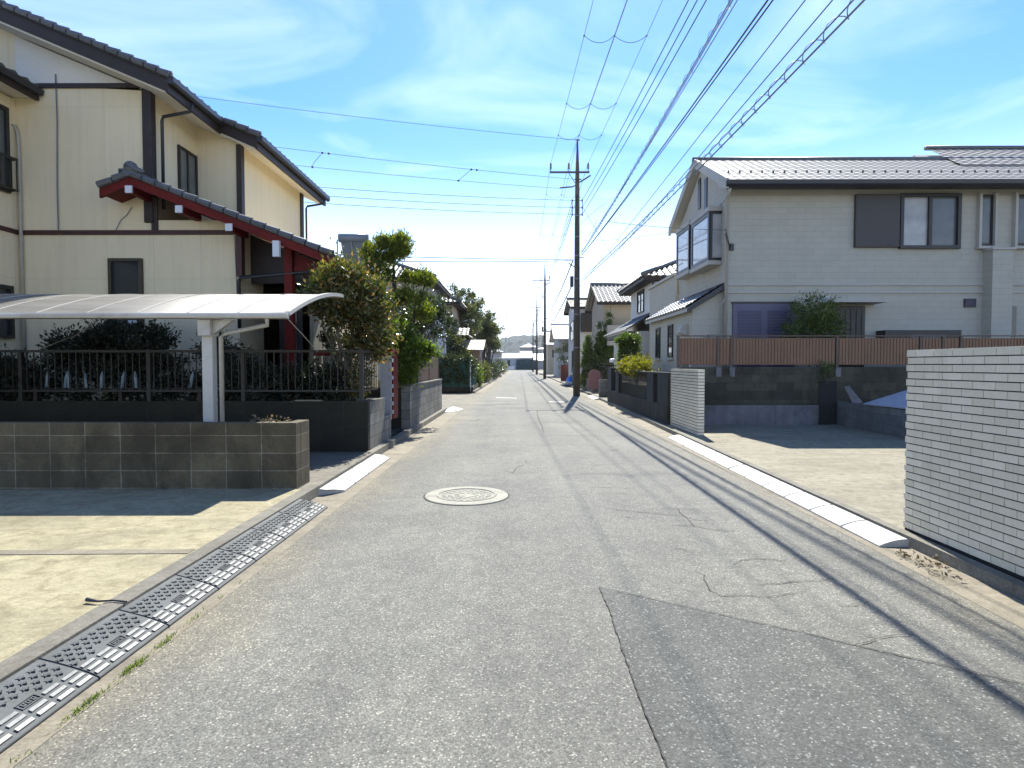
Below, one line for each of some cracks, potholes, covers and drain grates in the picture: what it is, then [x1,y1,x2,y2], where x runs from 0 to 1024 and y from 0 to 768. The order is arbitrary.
manhole cover [423,486,510,506]
crack [696,571,825,597]
